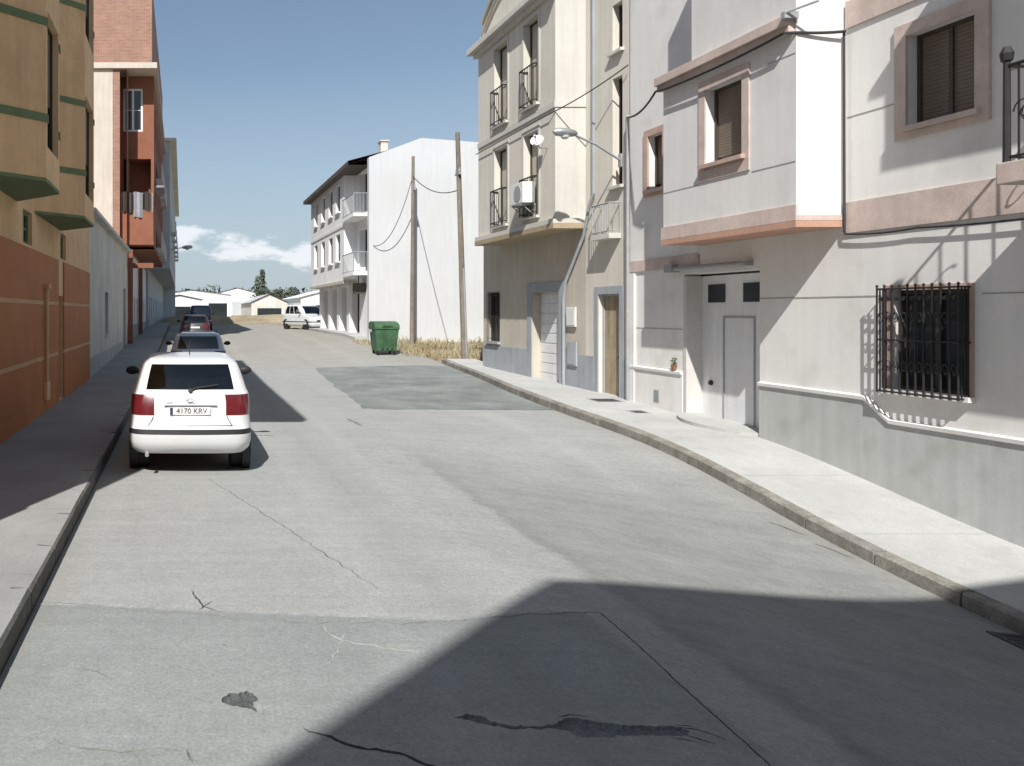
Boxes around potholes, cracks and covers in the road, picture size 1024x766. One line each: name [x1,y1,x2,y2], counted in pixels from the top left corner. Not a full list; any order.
crack [767,521,853,558]
crack [21,736,193,763]
pothole [454,713,727,744]
crack [191,590,220,612]
drain grate [986,631,1024,650]
crack [208,478,377,589]
crack [324,627,414,661]
pothole [222,691,258,712]
crack [305,729,435,766]
